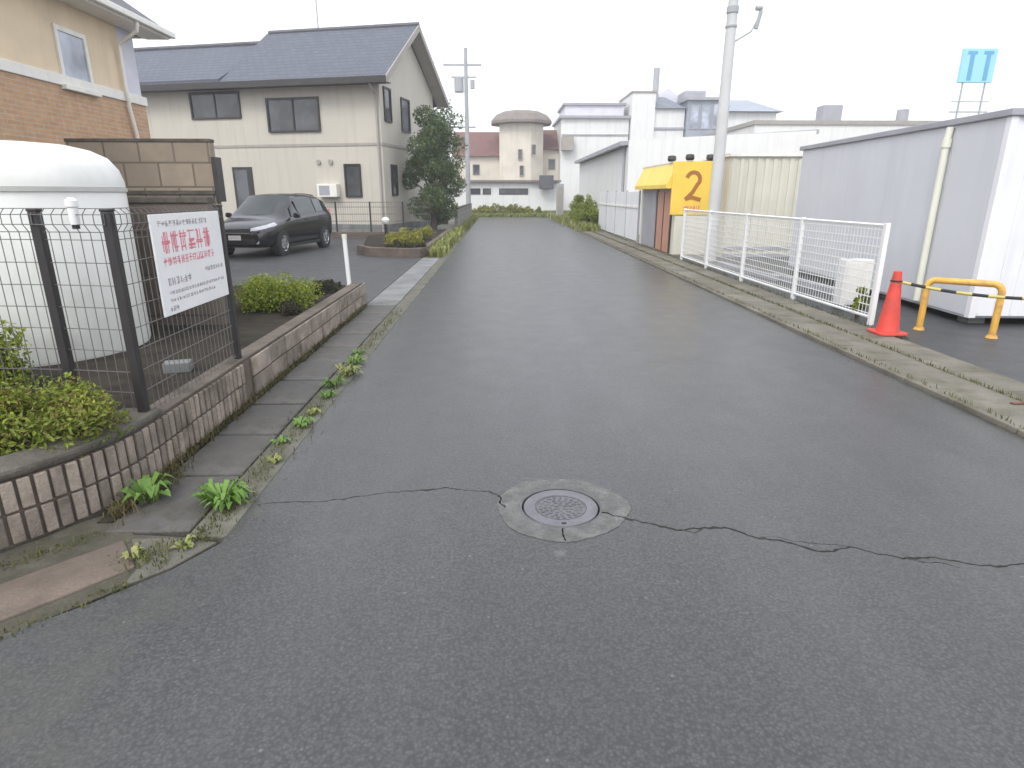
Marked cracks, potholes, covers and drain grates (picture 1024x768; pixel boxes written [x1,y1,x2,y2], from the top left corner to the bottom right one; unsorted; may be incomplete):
crack [602,512,1024,568]
manhole cover [497,479,631,542]
crack [266,487,506,507]
